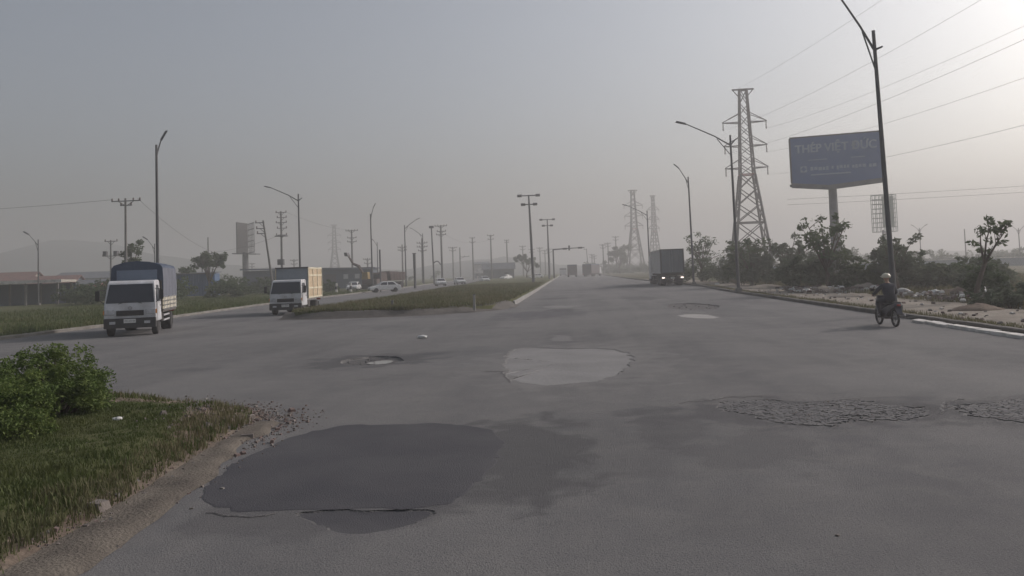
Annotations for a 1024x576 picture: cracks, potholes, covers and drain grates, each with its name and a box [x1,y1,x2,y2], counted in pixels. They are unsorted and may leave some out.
pothole [340,356,404,365]
